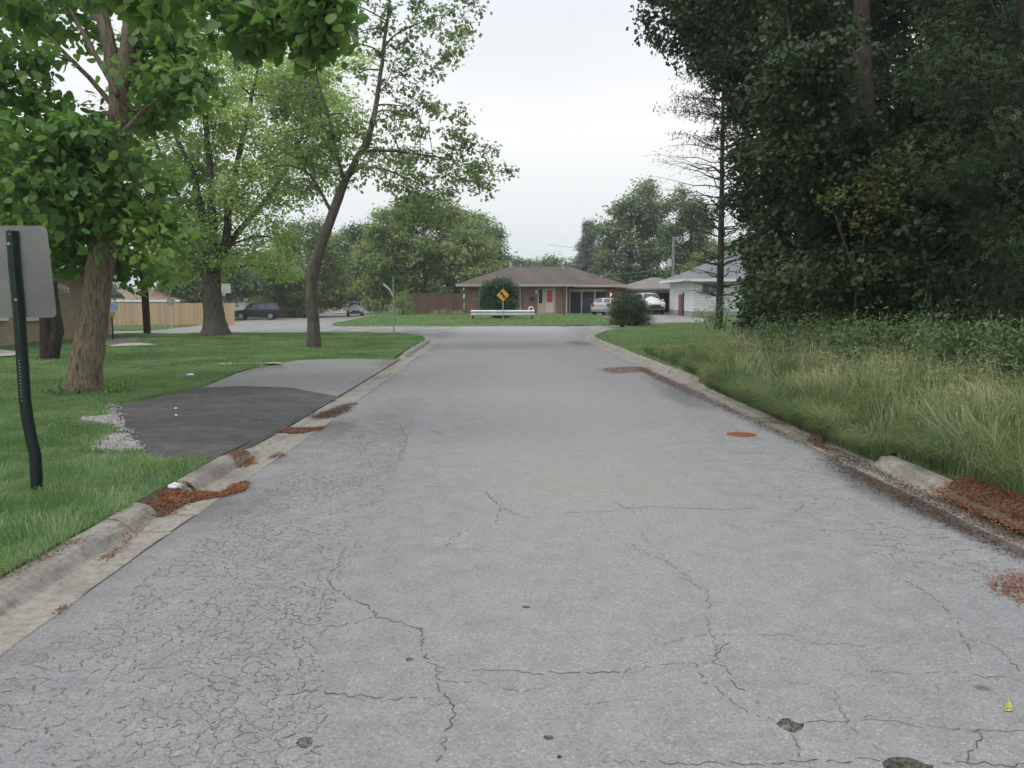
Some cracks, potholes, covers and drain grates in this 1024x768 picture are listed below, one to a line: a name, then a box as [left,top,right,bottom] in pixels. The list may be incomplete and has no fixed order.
crack [0,413,650,768]
crack [603,690,1018,767]
pothole [882,757,934,768]
crack [608,503,884,720]
pothole [777,718,804,733]
crack [683,408,1021,691]
pothole [296,737,313,749]
